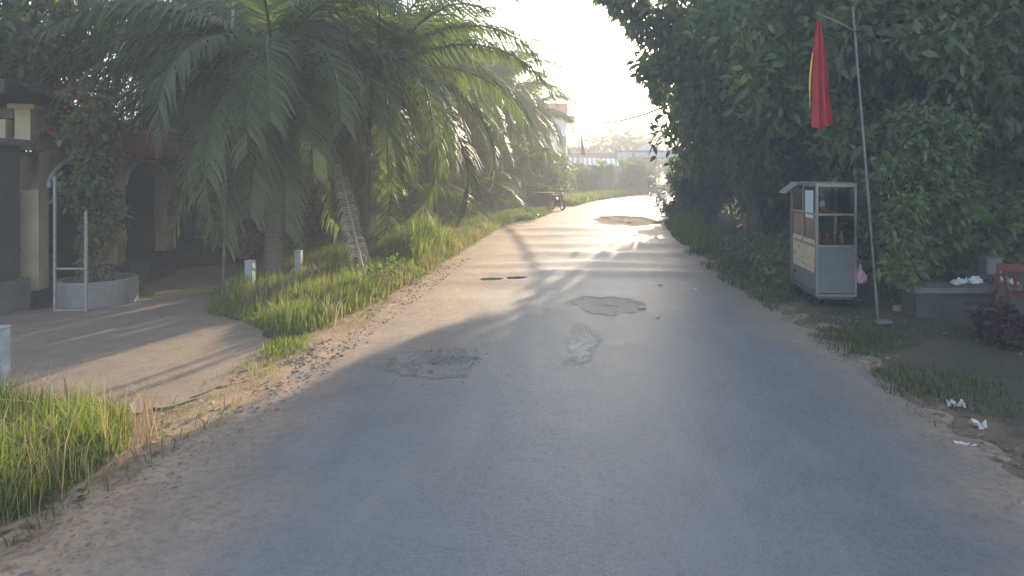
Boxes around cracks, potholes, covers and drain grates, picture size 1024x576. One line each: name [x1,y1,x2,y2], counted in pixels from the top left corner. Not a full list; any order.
pothole [381,345,478,380]
pothole [559,322,604,368]
